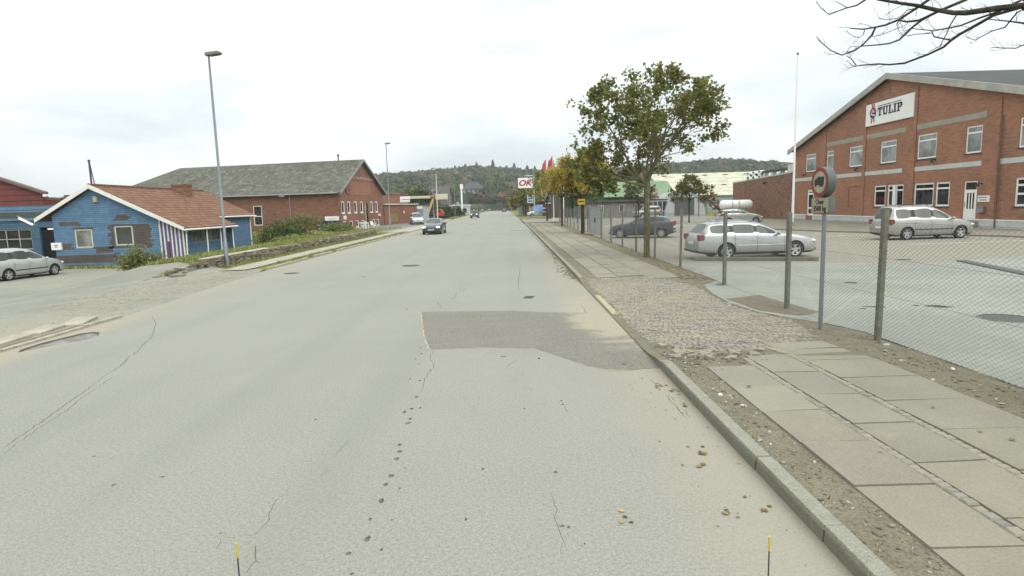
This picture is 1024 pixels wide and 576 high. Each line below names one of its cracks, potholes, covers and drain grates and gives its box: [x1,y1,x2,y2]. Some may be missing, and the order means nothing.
manhole cover [976,314,1024,323]
crack [218,491,287,574]
pothole [19,332,100,352]
crack [4,316,156,449]
